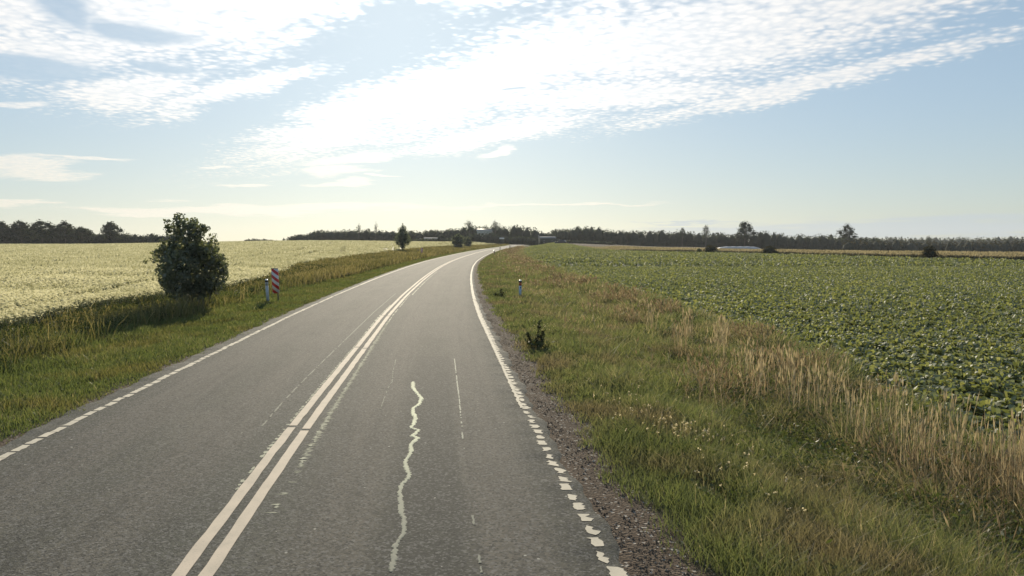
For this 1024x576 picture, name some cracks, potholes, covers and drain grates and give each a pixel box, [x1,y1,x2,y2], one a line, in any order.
crack [380,358,424,572]
